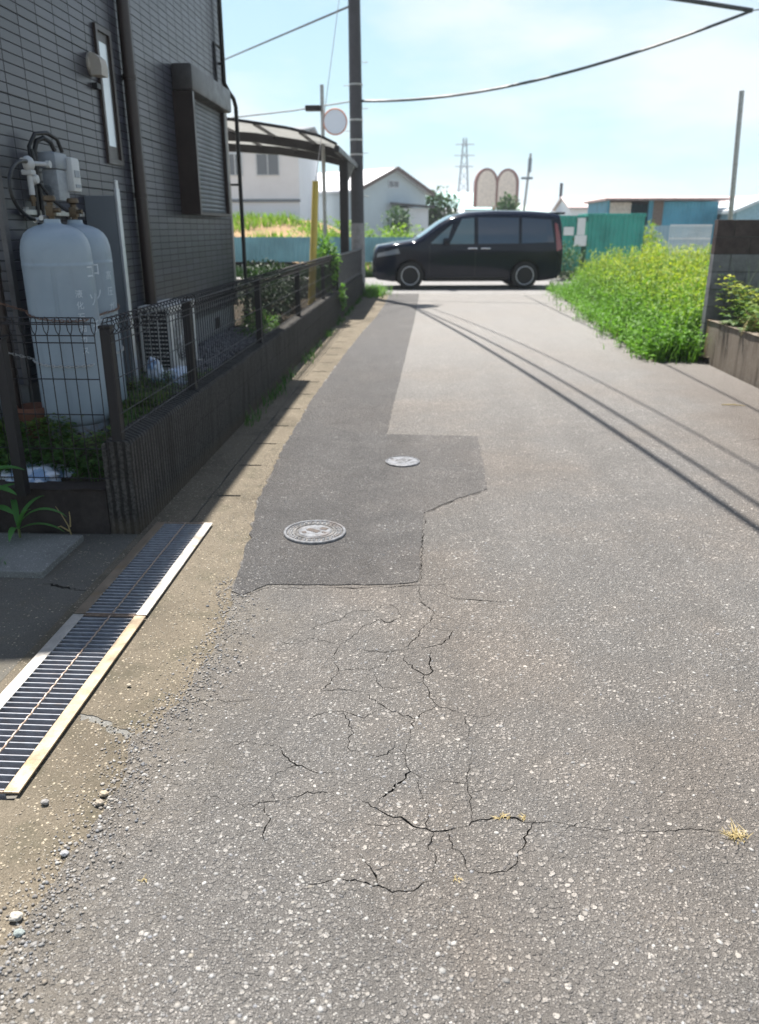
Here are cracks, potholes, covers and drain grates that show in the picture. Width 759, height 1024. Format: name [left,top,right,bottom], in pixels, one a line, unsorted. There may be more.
drain grate [74,522,213,619]
crack [211,741,335,844]
drain grate [0,614,146,800]
crack [43,583,86,591]
crack [283,591,712,874]
manhole cover [283,520,346,545]
manhole cover [385,456,420,467]
